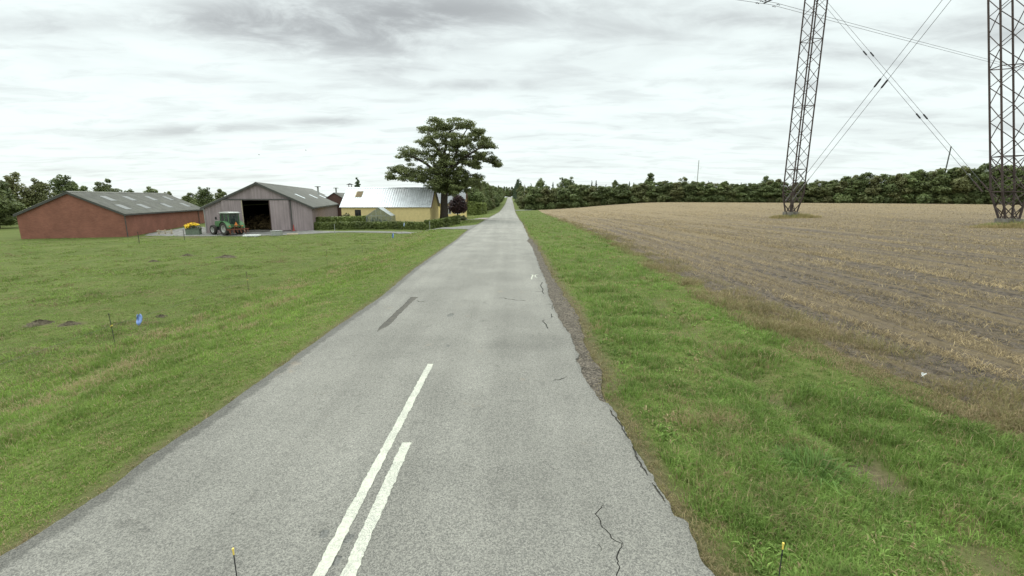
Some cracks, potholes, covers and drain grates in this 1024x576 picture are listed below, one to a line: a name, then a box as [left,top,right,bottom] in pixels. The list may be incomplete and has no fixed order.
crack [595,506,624,576]
